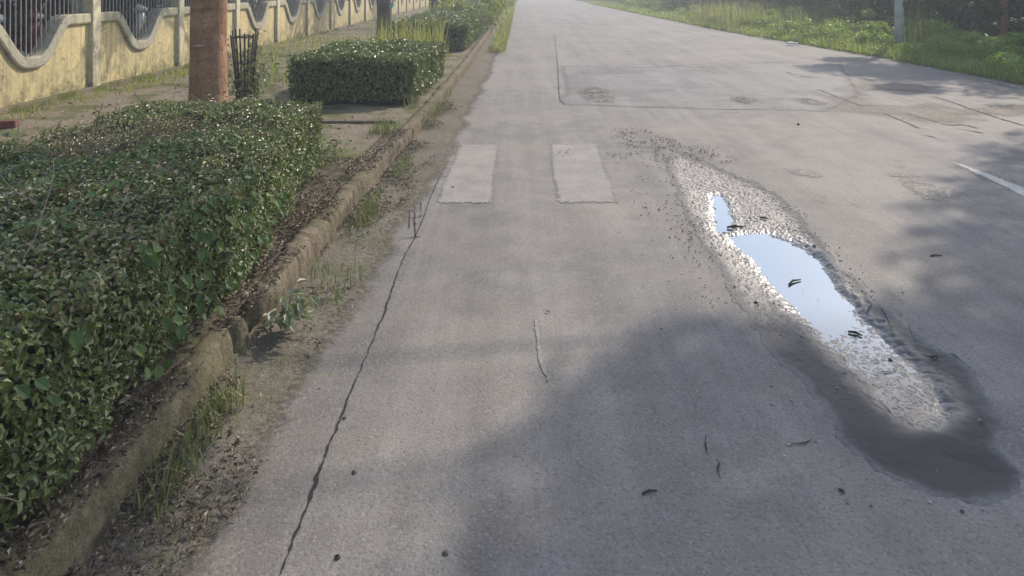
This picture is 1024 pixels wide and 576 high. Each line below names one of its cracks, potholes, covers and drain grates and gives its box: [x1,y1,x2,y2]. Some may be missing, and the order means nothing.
crack [281,161,448,574]
pothole [666,150,1024,506]
crack [883,96,1024,138]
